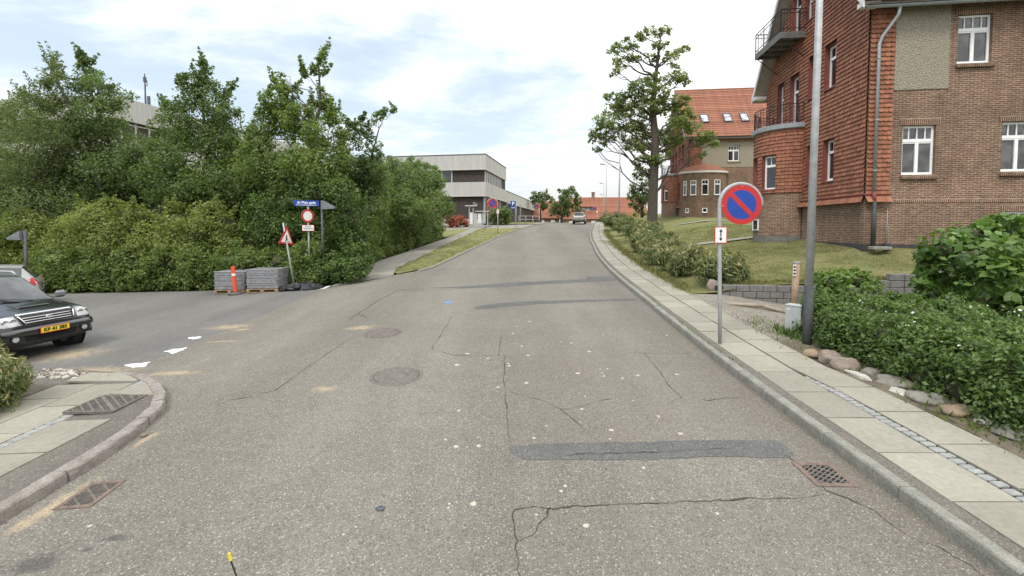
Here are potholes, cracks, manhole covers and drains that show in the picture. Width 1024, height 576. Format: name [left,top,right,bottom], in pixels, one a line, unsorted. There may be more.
crack [512,494,821,576]
crack [817,480,983,575]
drain grate [52,479,127,510]
manhole cover [369,367,423,386]
drain grate [62,394,148,414]
drain grate [791,462,860,487]
manhole cover [364,328,402,338]
